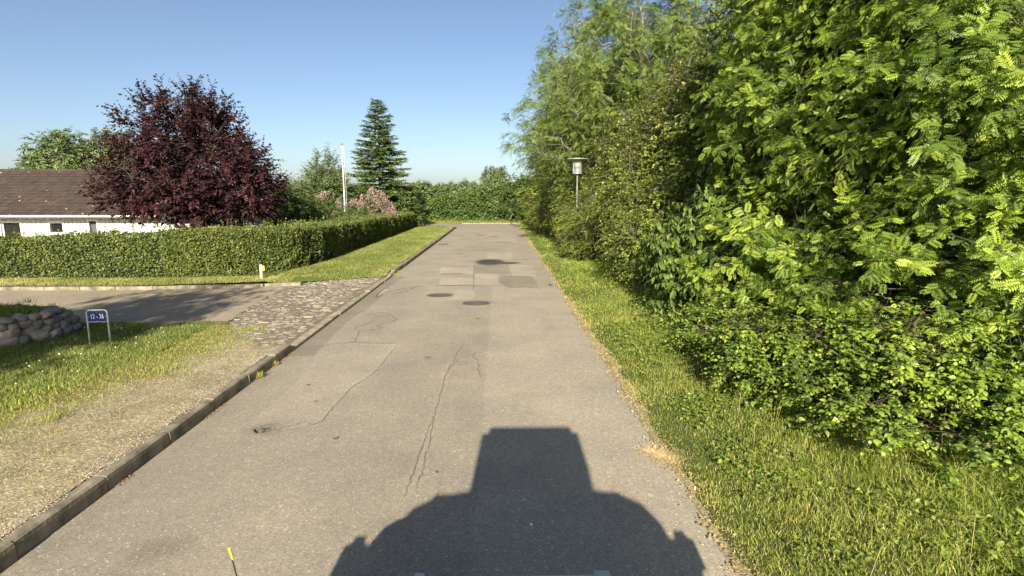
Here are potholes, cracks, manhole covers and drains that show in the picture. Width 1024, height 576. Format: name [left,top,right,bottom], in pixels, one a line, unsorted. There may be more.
pothole [247,422,281,436]
crack [404,345,483,497]
crack [281,286,419,428]
